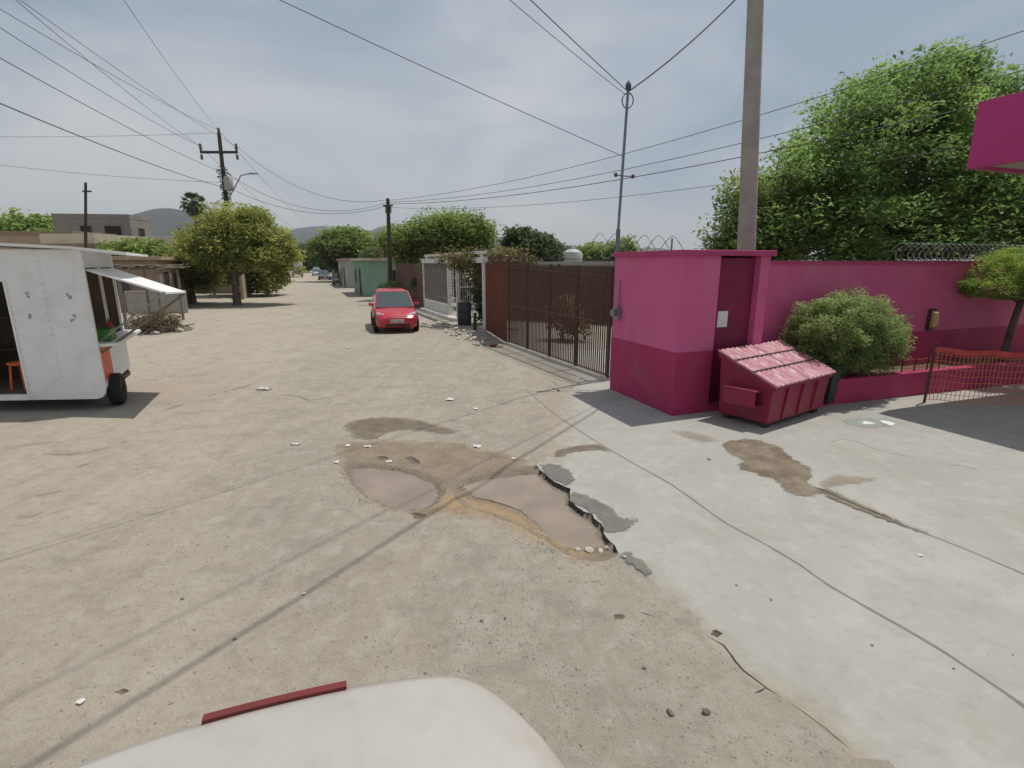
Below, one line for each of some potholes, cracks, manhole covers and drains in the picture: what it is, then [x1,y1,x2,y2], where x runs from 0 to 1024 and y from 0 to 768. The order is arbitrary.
pothole [452,465,618,562]
crack [704,634,849,748]
pothole [342,460,446,511]
